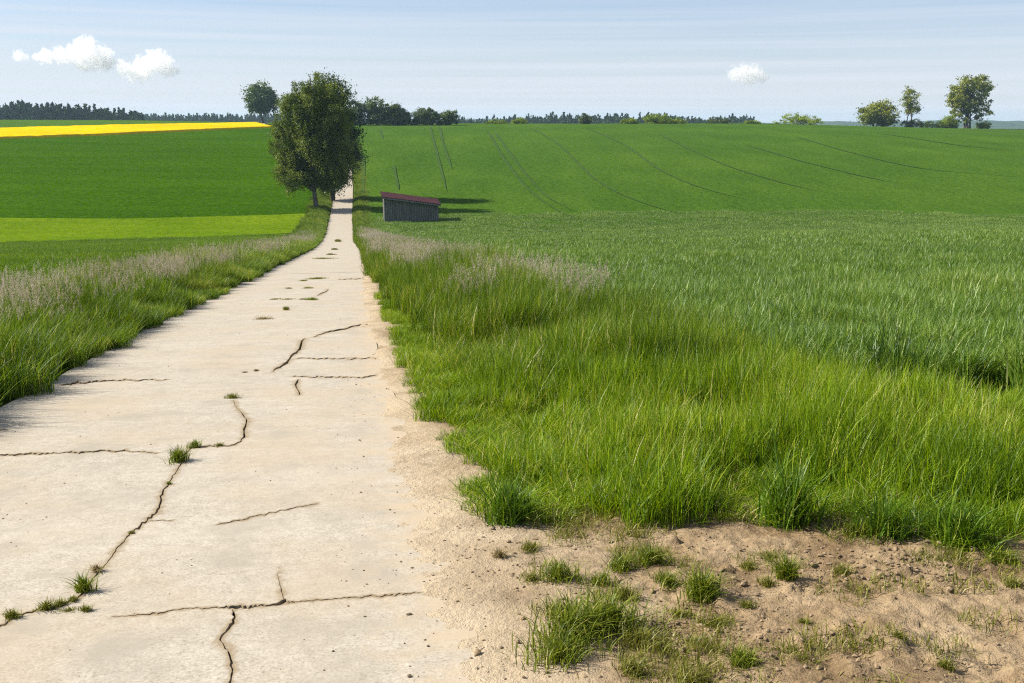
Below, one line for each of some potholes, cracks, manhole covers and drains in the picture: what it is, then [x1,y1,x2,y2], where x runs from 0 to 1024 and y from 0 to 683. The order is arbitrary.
crack [217,504,313,525]
crack [273,324,376,394]
crack [114,574,421,683]
crack [0,400,247,627]
